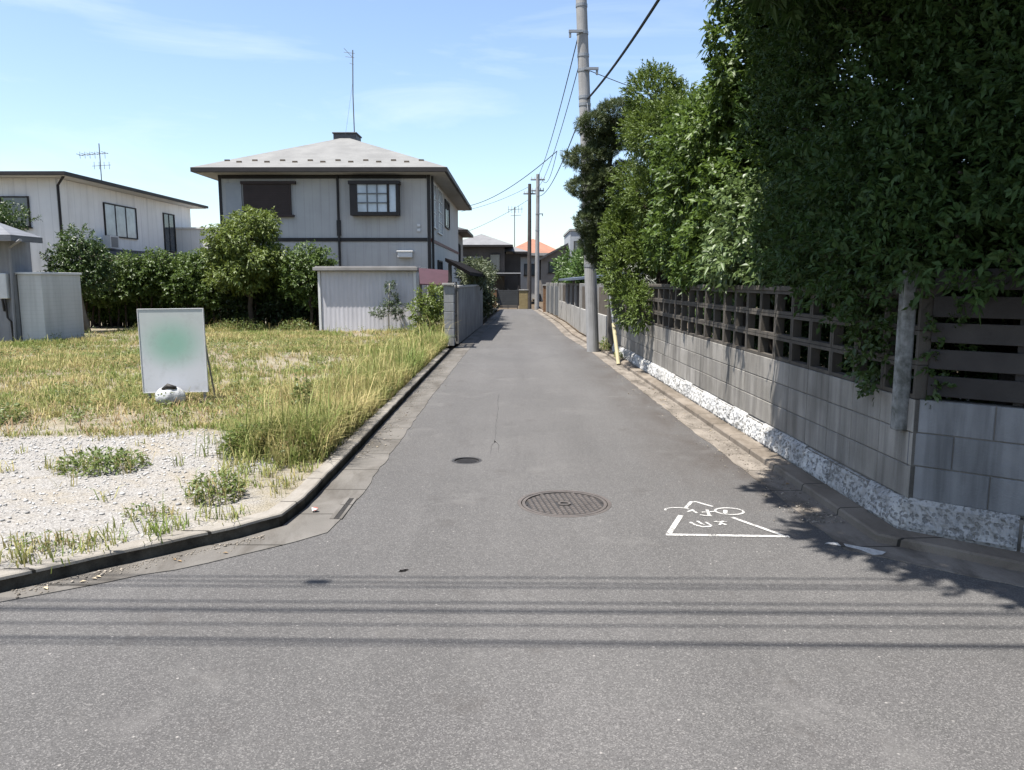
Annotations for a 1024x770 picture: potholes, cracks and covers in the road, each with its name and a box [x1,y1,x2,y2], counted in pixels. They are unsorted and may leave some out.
manhole cover [518,490,611,518]
